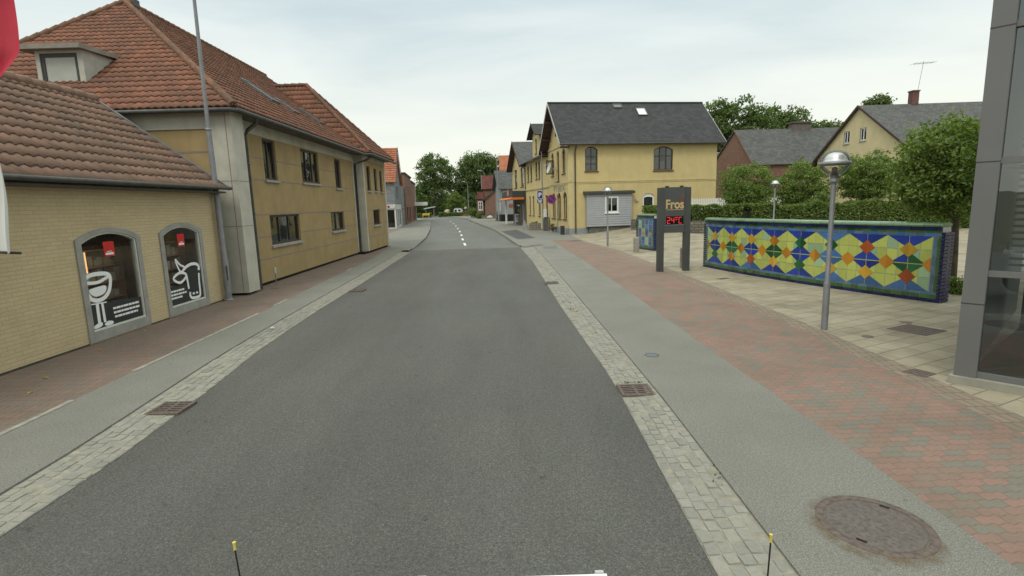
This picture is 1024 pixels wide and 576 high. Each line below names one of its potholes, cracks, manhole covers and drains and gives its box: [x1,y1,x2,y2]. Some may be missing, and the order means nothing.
drain grate [616,383,656,397]
drain grate [144,401,197,416]
manhole cover [815,496,941,559]
